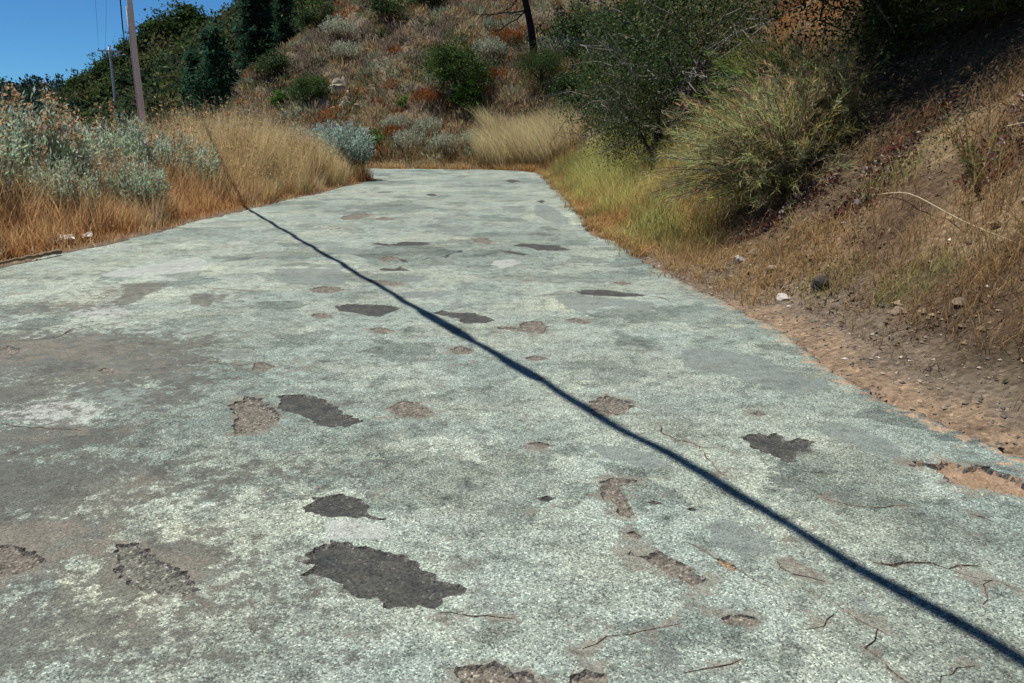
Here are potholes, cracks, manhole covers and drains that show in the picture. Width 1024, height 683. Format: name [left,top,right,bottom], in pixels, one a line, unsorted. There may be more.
pothole [226,396,282,435]
crack [738,562,825,586]
pothole [113,542,202,598]
pothole [589,395,635,416]
crack [806,607,975,683]
pothole [599,477,637,519]
pothole [497,321,549,334]
pothole [454,661,537,683]
crack [873,561,1018,605]
crack [582,624,678,649]
crack [660,426,729,477]
